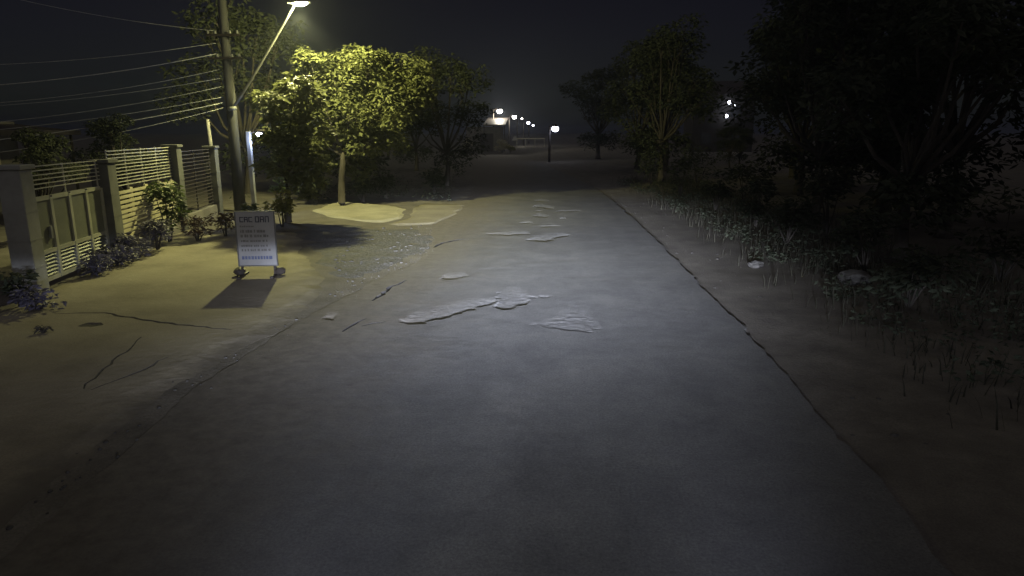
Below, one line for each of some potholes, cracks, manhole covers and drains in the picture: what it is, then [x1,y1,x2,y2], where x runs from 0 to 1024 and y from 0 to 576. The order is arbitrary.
crack [55,312,231,390]
crack [342,319,382,332]
crack [372,280,407,301]
